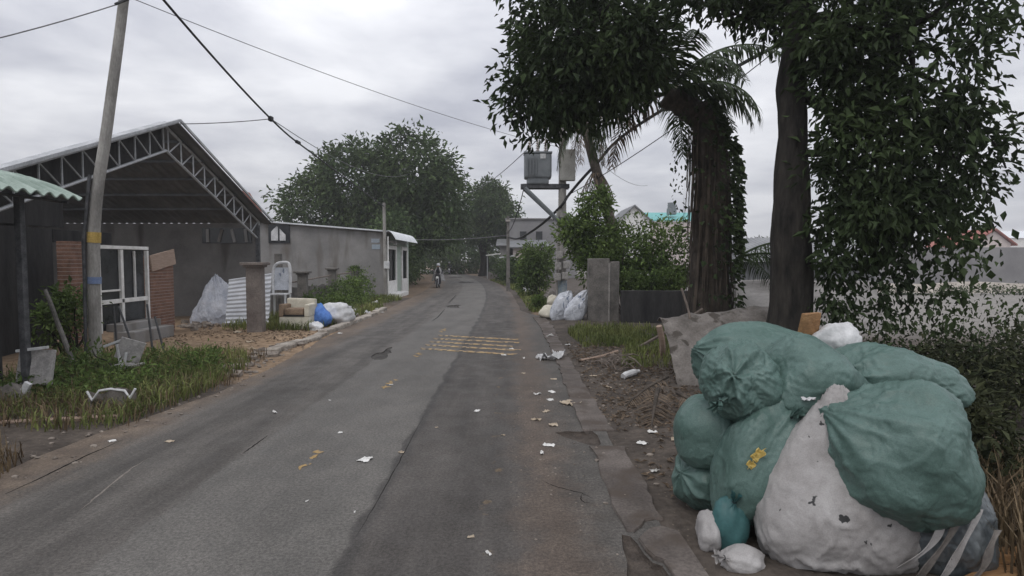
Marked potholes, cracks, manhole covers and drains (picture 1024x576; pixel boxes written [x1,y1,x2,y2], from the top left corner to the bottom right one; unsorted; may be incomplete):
pothole [371,347,392,360]
pothole [555,431,601,446]
